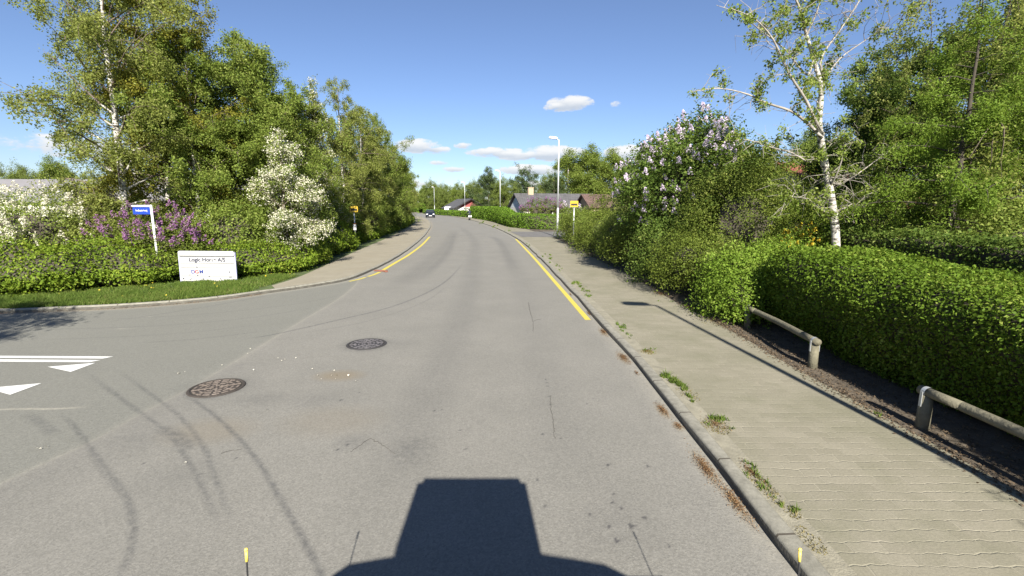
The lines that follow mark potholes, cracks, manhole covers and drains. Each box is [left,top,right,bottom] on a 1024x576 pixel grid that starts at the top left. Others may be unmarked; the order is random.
manhole cover [186,378,246,398]
manhole cover [346,338,387,350]
